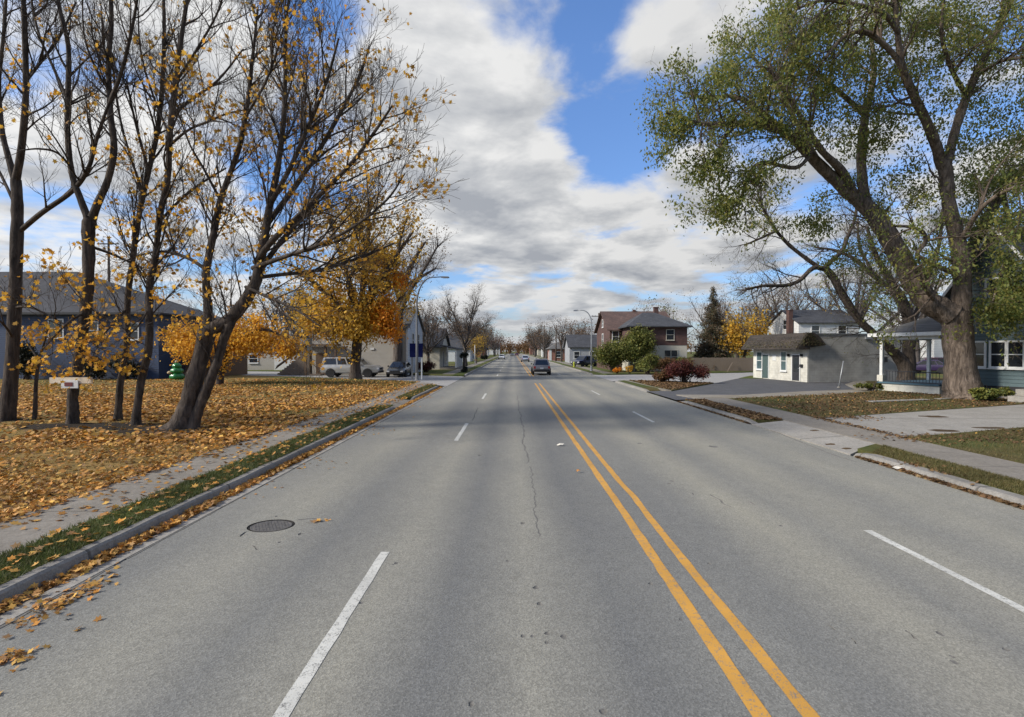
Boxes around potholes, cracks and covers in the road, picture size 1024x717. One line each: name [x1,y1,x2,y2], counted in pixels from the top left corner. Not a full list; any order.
manhole cover [247,519,295,532]
